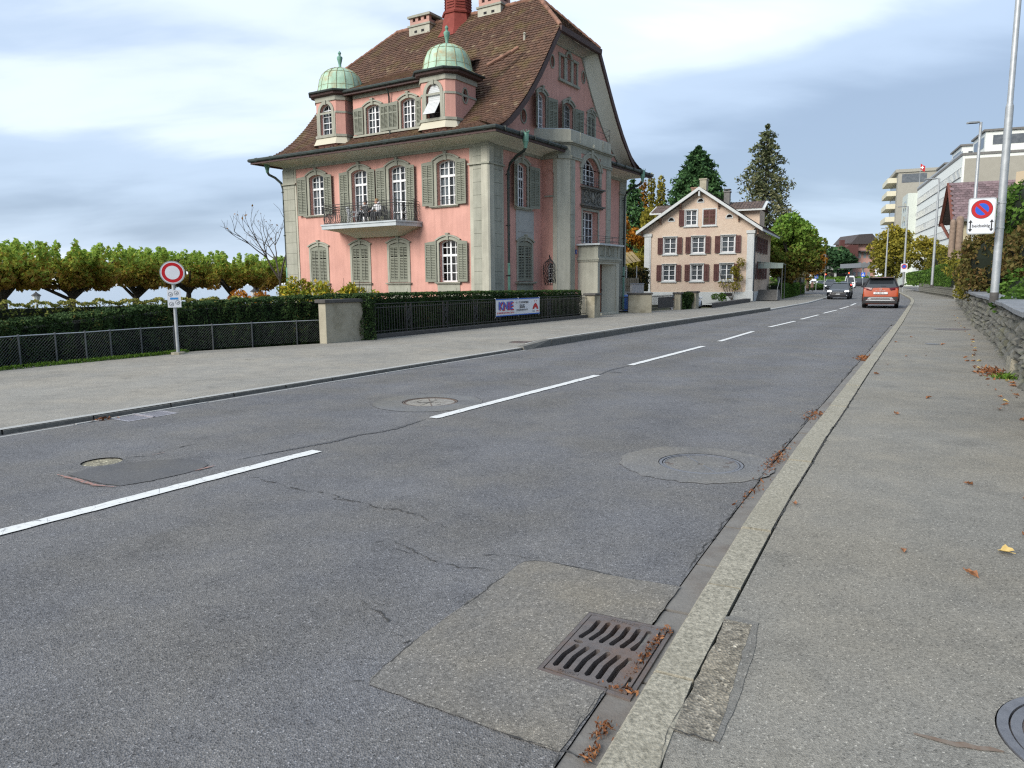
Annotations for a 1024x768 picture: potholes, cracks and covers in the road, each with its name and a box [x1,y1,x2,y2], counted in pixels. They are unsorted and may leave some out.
manhole cover [402,398,458,406]
crack [375,540,521,575]
crack [360,599,412,643]
manhole cover [80,457,123,466]
drain grate [537,612,674,764]
drain grate [112,410,177,422]
manhole cover [995,697,1024,762]
manhole cover [658,454,744,474]
